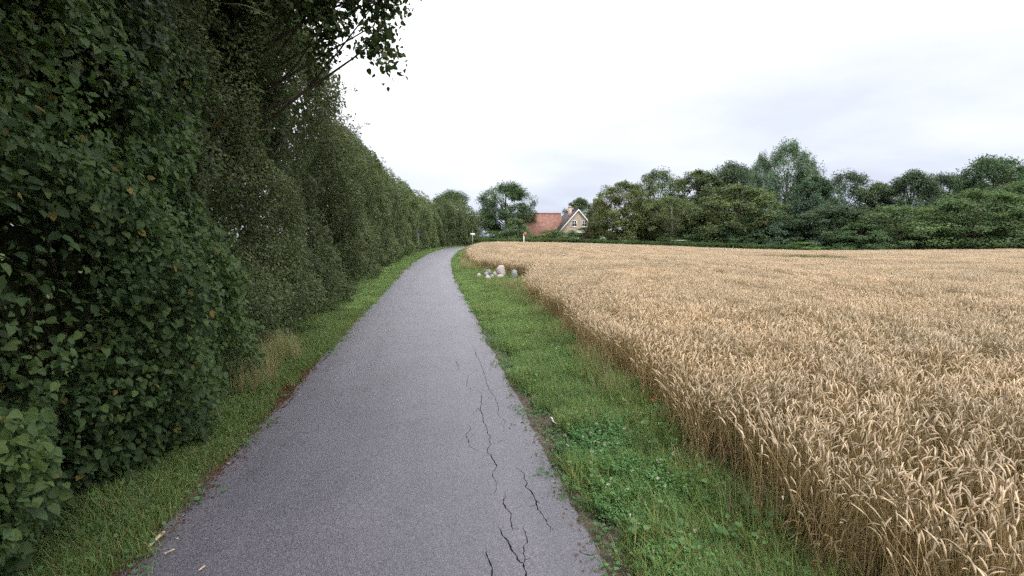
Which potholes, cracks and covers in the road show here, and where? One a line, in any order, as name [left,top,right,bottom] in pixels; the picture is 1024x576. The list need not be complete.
crack [456,349,551,576]
